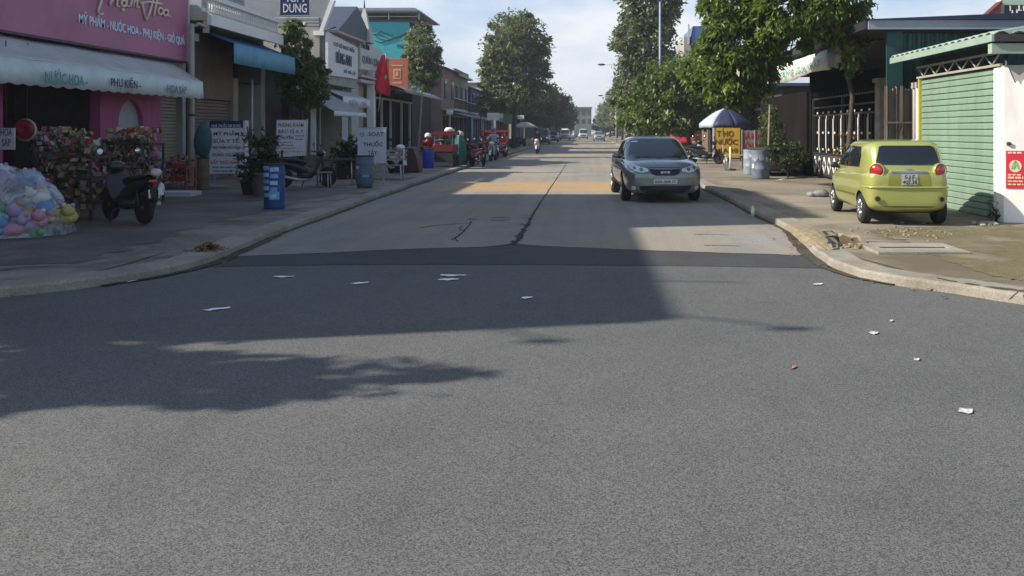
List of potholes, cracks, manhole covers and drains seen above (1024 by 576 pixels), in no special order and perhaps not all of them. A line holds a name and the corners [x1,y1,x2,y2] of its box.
crack [420,163,567,244]
